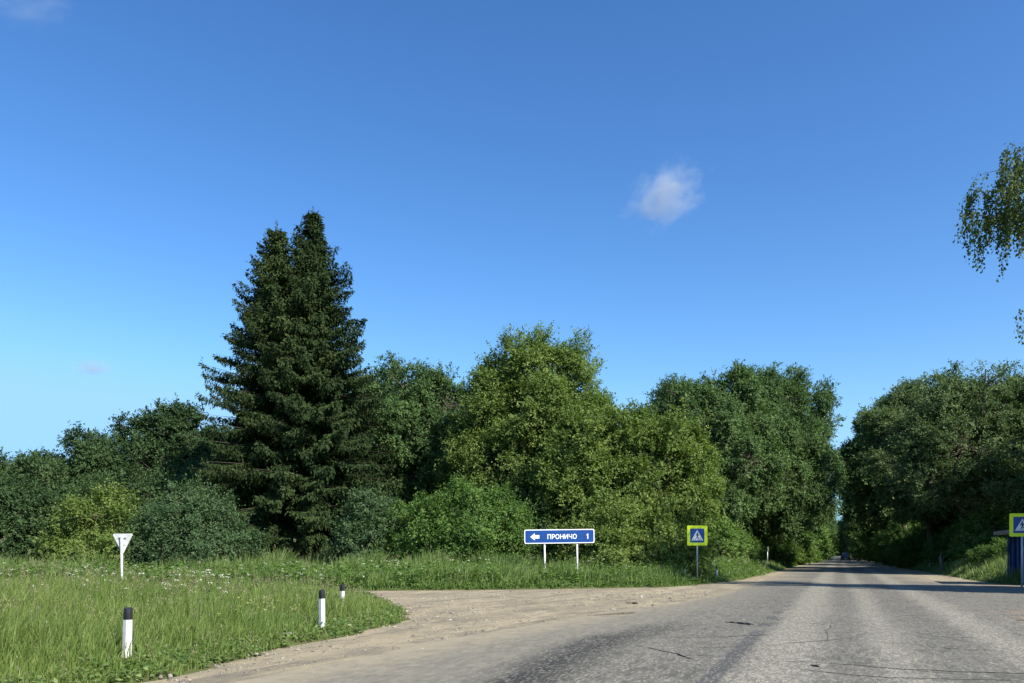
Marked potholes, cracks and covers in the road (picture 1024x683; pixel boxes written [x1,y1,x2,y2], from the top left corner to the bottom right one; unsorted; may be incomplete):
crack [757,660,1024,681]
crack [636,634,767,660]
crack [793,623,851,643]
